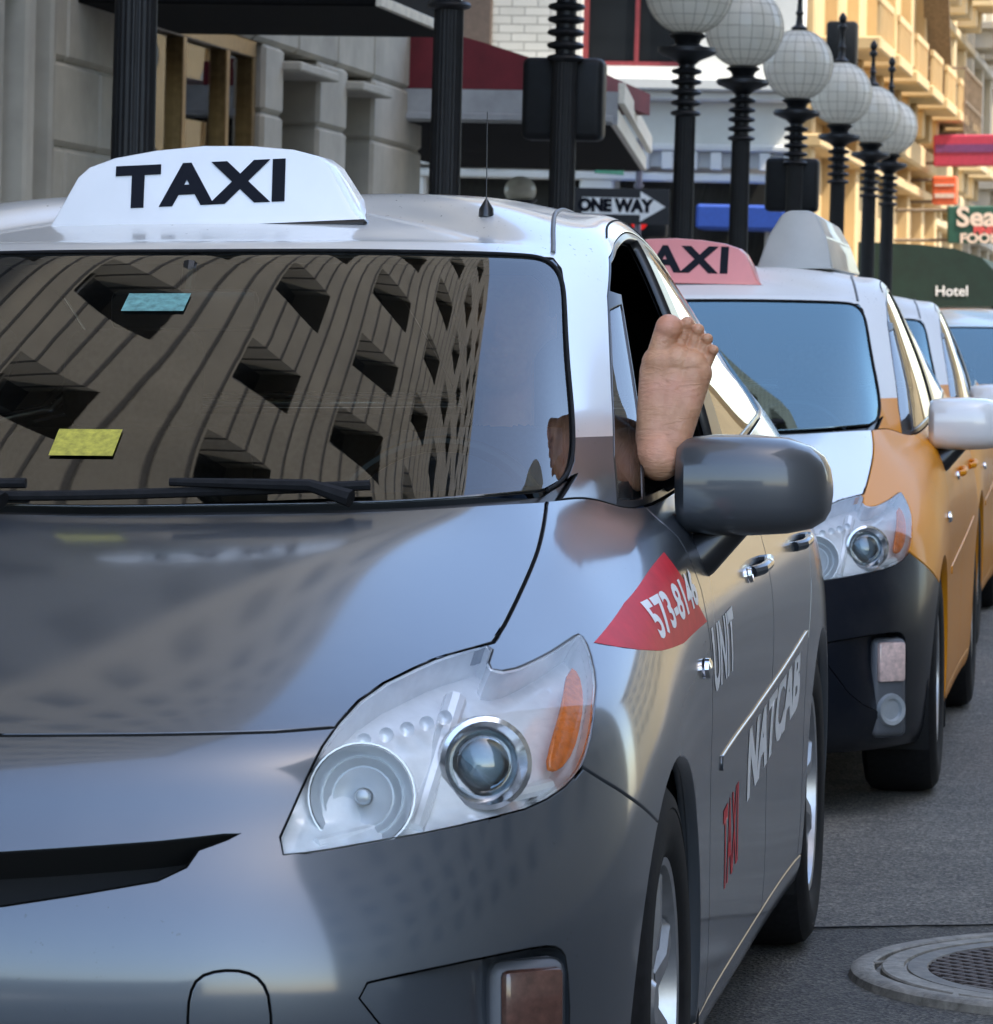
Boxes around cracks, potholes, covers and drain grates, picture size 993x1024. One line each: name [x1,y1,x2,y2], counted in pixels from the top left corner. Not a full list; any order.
manhole cover [848,932,993,1015]
